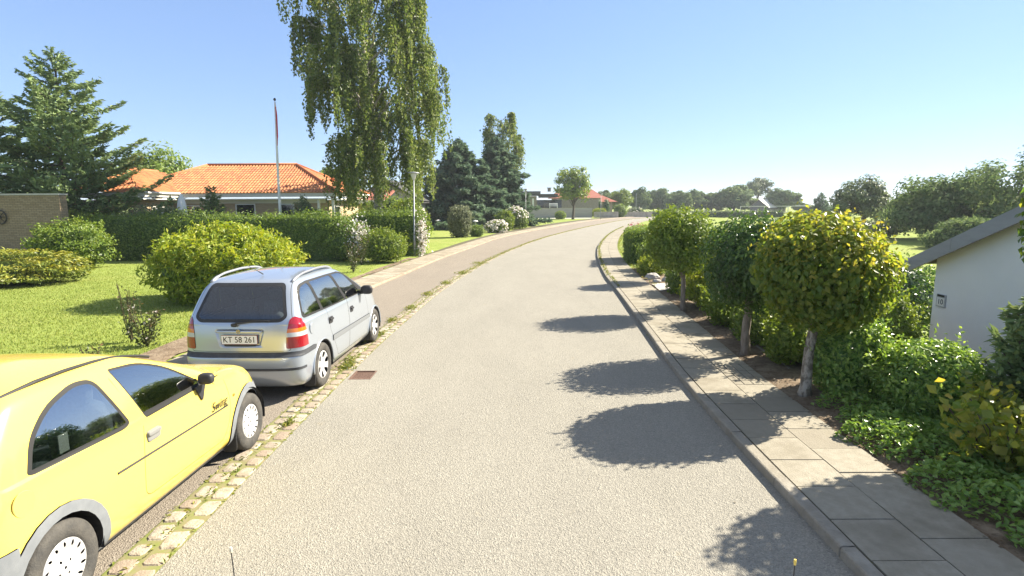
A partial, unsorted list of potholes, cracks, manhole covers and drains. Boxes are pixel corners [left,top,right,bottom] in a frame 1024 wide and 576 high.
drain grate [348,371,377,380]
